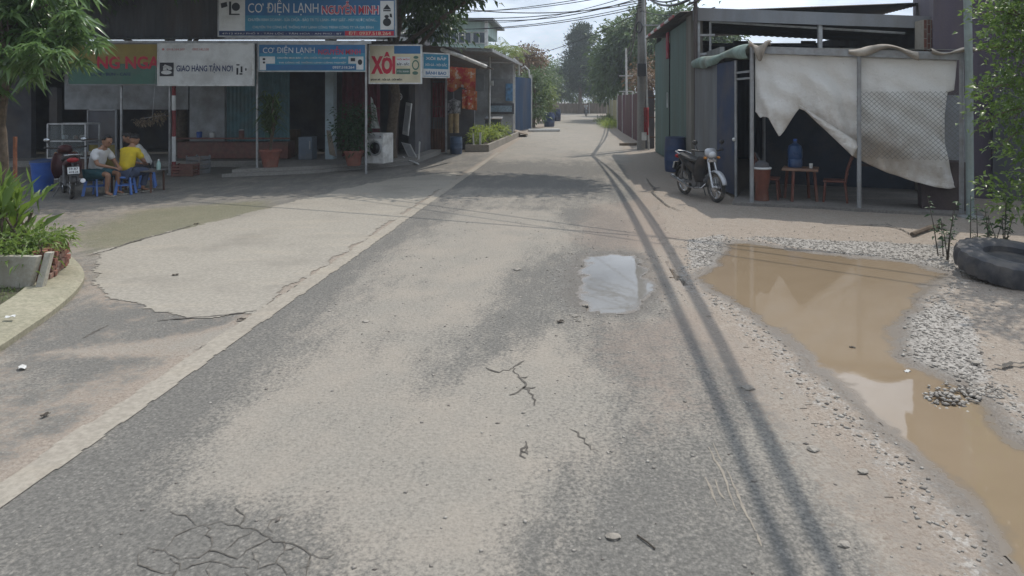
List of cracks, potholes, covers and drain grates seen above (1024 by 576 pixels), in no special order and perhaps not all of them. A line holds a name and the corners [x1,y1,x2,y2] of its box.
crack [137,507,334,576]
crack [486,360,536,406]
pothole [694,241,1019,576]
pothole [571,253,660,315]
crack [519,441,528,458]
